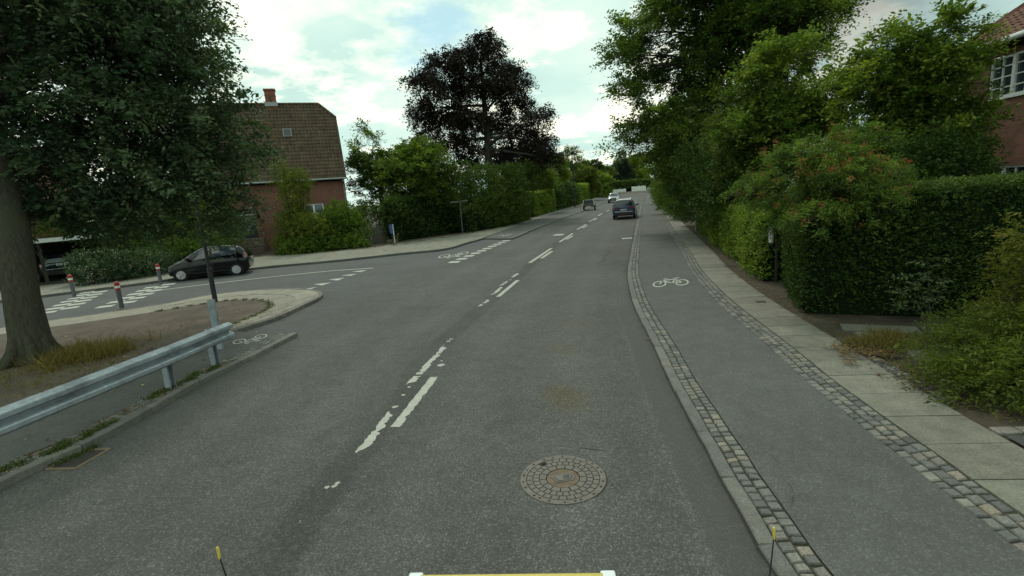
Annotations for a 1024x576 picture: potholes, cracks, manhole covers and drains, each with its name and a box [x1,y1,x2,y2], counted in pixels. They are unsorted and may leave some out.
drain grate [43,448,112,471]
manhole cover [520,455,608,505]
